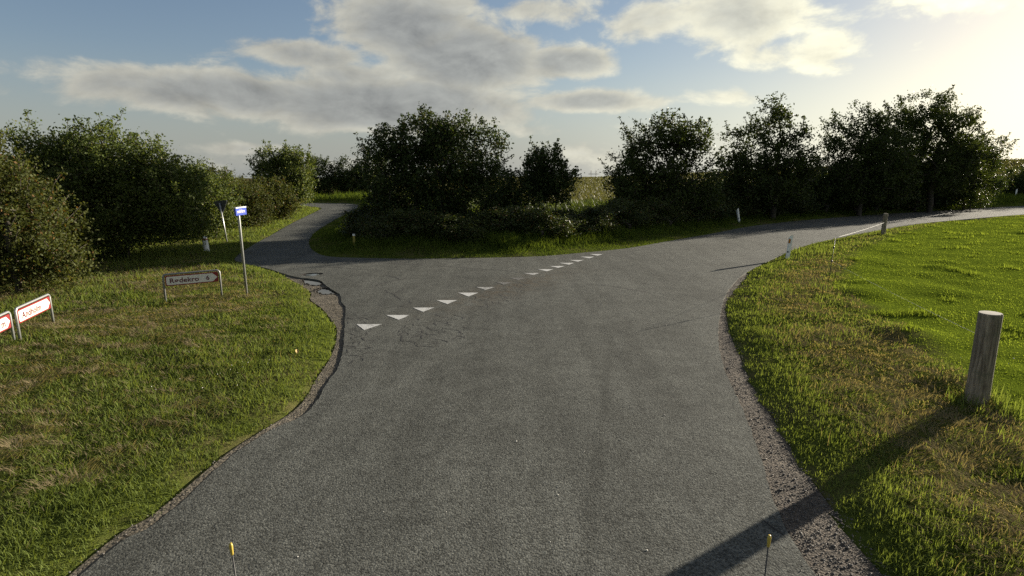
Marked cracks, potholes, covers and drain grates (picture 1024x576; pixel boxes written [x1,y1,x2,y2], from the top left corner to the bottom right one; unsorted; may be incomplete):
crack [398,314,472,347]
